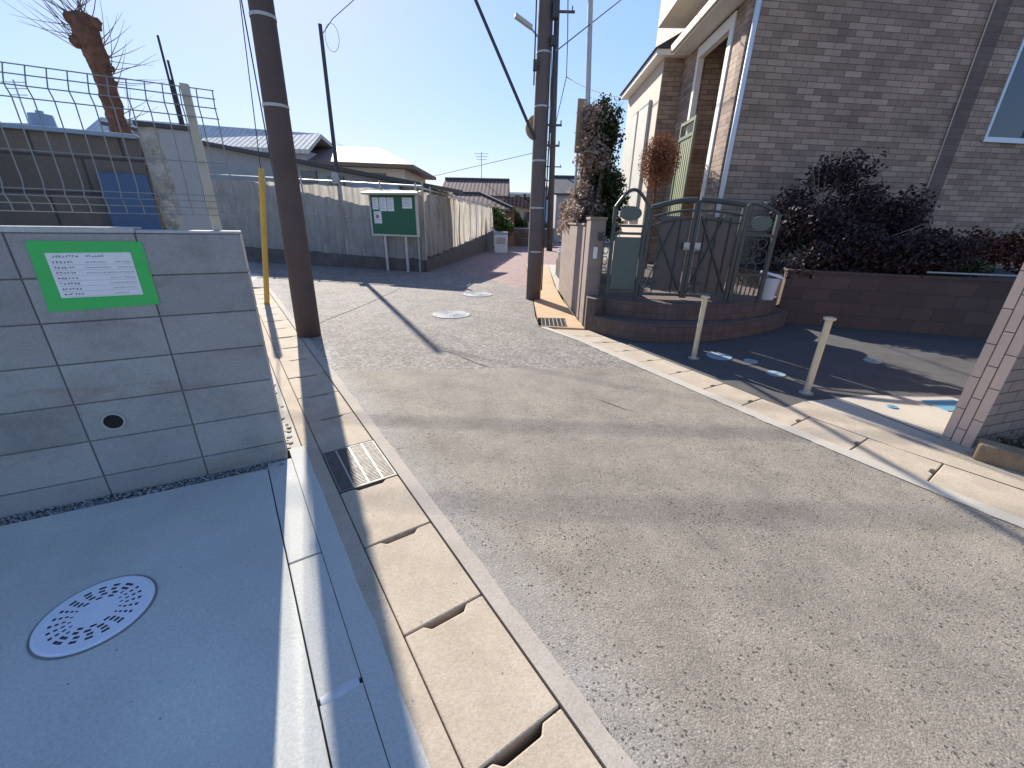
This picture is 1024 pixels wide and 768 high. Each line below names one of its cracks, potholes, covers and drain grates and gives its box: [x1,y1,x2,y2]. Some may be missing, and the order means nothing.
manhole cover [26,574,158,660]
drain grate [322,440,397,497]
drain grate [541,318,567,327]
manhole cover [432,310,471,319]
